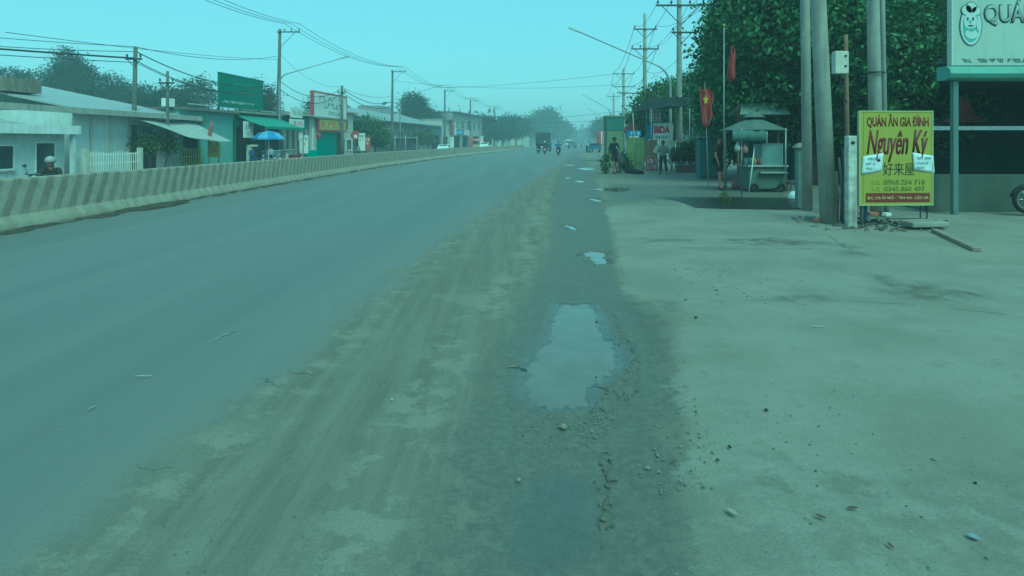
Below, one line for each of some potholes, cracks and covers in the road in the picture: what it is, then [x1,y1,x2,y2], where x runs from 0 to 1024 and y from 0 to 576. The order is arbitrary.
pothole [500,300,637,419]
pothole [573,249,620,267]
crack [597,456,620,530]
pothole [555,224,585,232]
